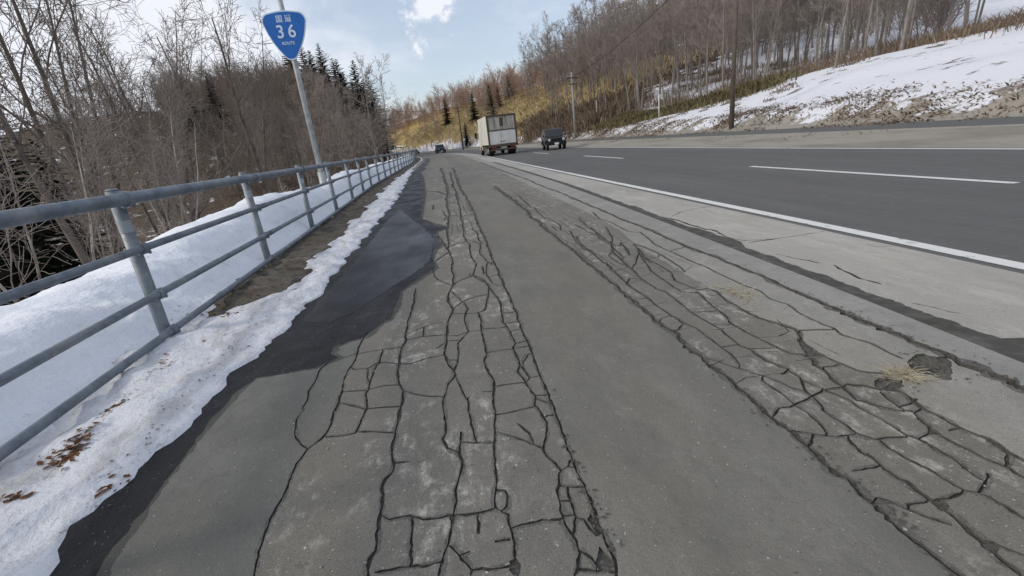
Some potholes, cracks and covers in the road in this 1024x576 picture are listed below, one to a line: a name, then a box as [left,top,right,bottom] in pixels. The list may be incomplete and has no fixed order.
crack [253,168,1024,576]
pothole [907,353,960,380]
